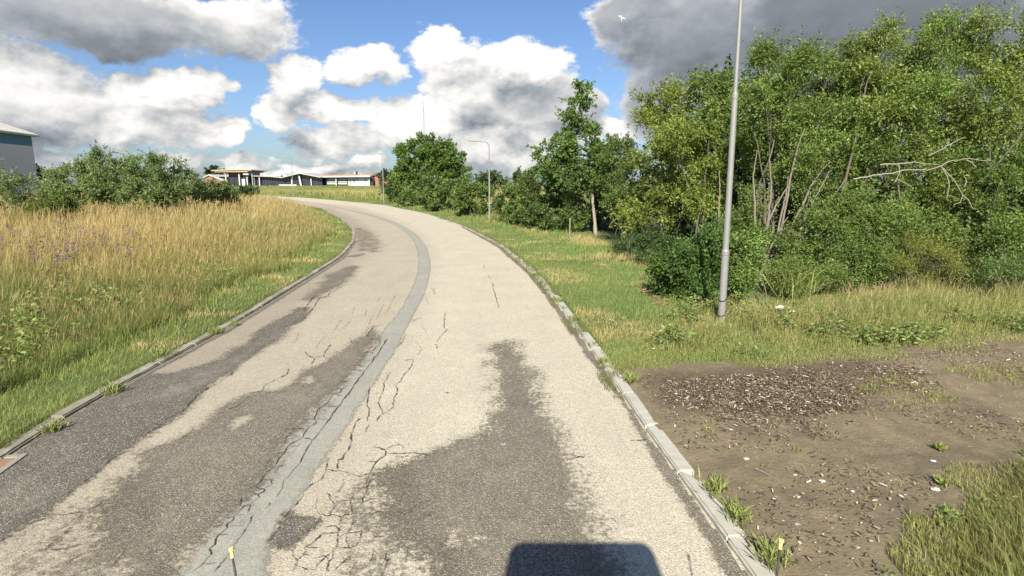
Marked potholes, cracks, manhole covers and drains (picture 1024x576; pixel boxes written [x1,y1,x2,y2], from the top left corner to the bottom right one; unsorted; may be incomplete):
crack [197,275,447,573]
